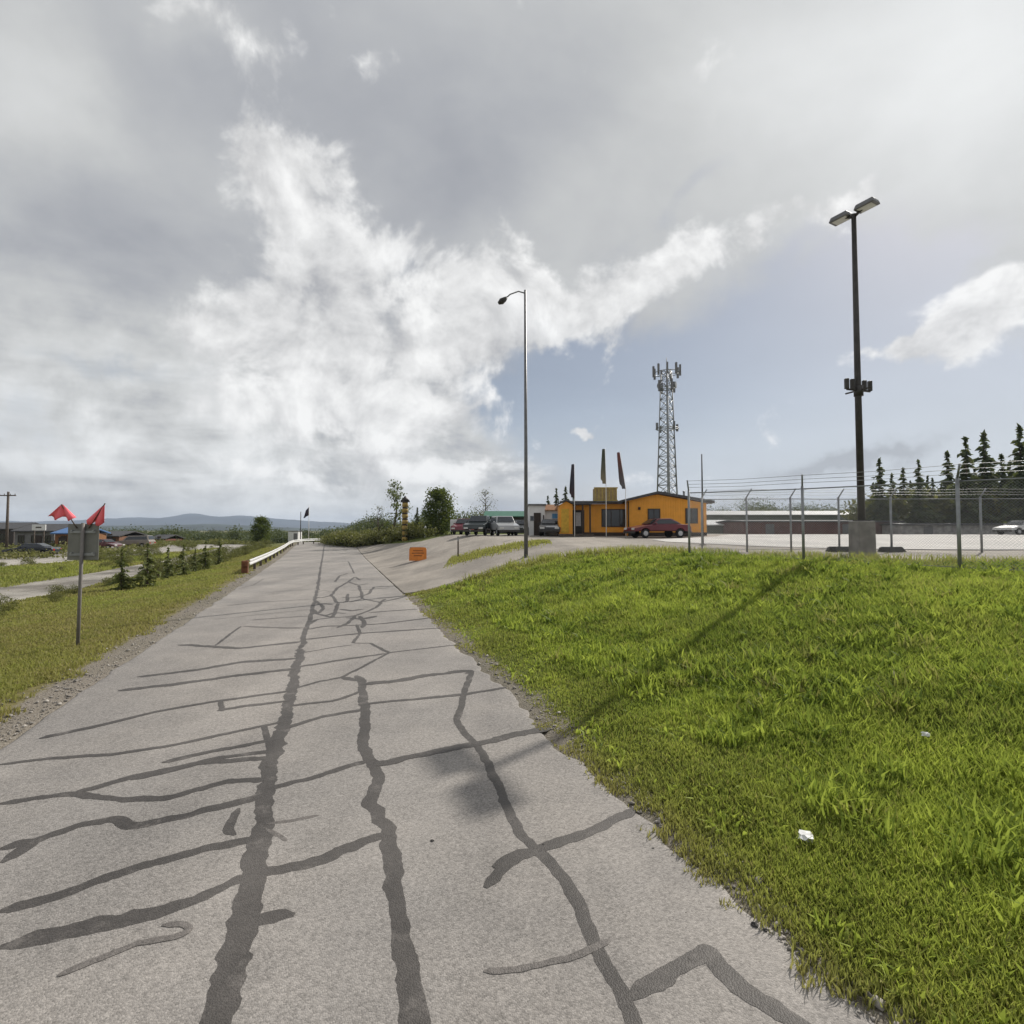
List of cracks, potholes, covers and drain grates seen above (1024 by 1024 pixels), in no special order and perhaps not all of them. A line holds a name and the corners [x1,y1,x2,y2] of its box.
crack [484,938,611,974]
crack [262,815,319,841]
crack [221,561,436,667]
